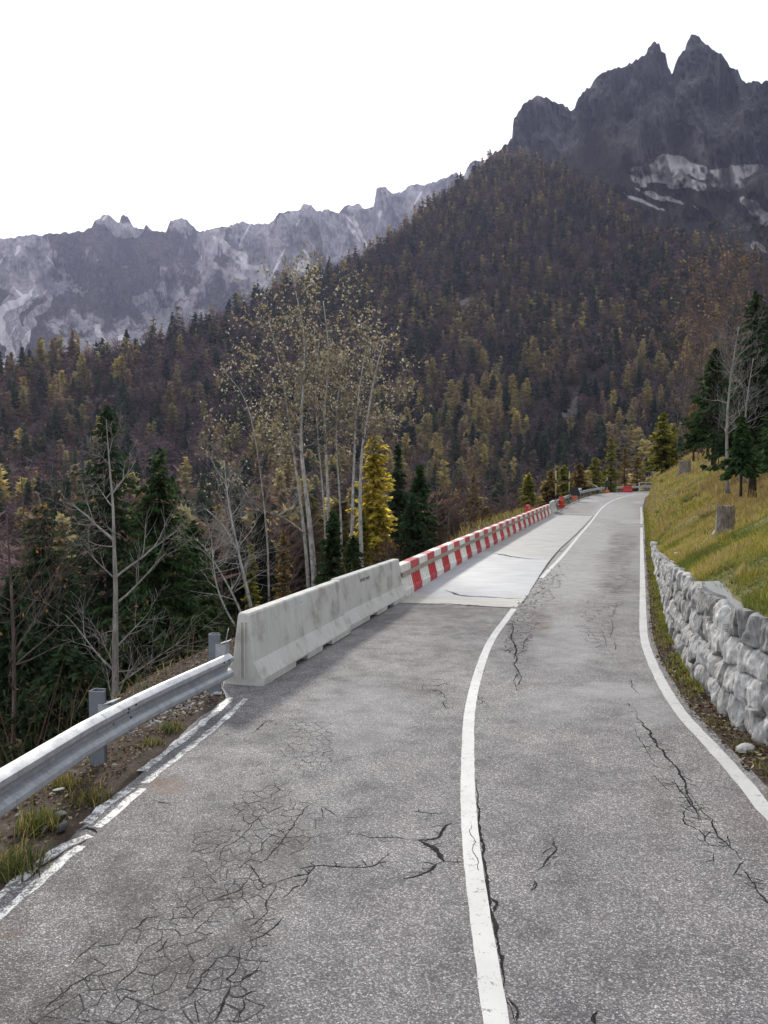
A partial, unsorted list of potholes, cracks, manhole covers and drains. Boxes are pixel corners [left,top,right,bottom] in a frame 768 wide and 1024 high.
crack [505,517,593,689]
crack [531,838,562,890]
crack [28,719,479,1024]
crack [580,538,631,654]
crack [422,670,488,708]
crack [627,680,768,903]
